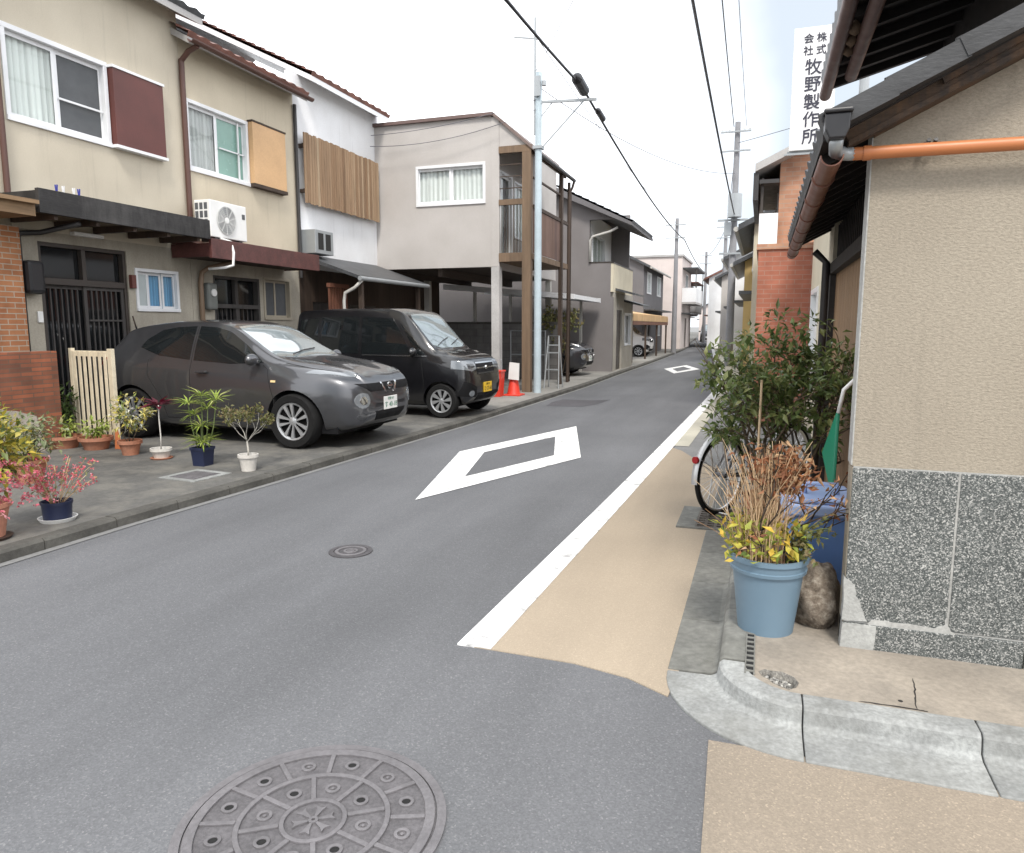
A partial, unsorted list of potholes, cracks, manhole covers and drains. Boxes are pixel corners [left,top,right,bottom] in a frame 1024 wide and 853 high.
manhole cover [329,544,373,558]
drain grate [676,506,748,531]
utility cover [158,469,232,483]
crack [861,678,928,712]
manhole cover [168,745,446,853]
